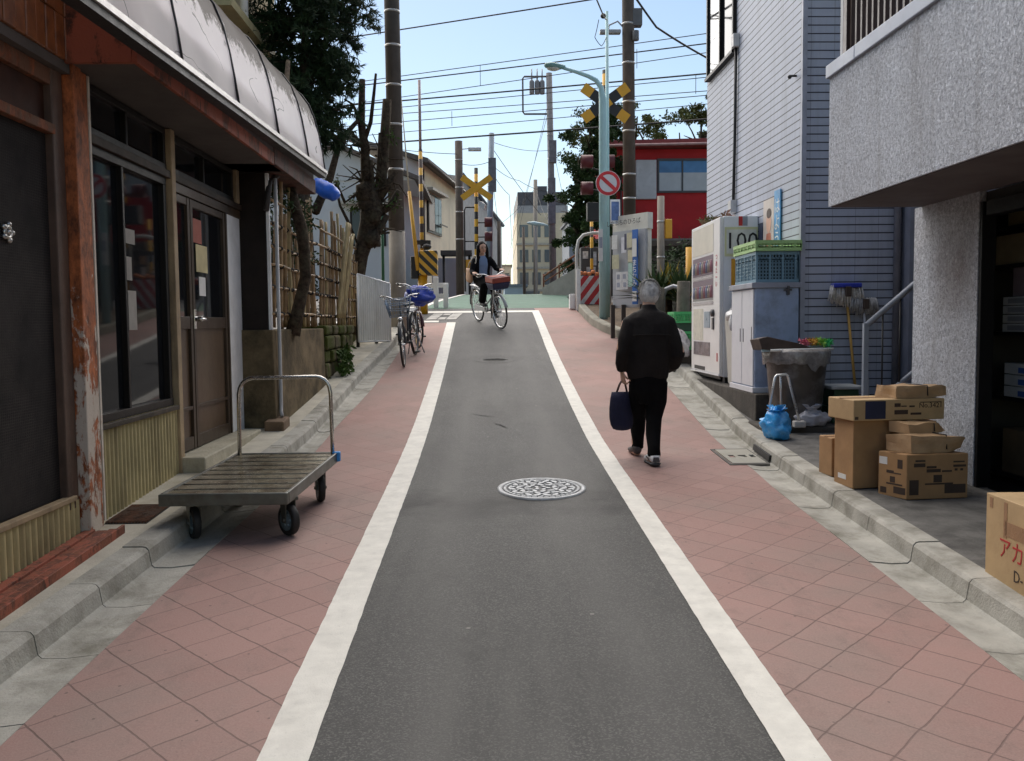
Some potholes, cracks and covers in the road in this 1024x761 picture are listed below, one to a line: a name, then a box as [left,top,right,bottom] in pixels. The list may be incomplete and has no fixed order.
manhole cover [497,478,586,500]
